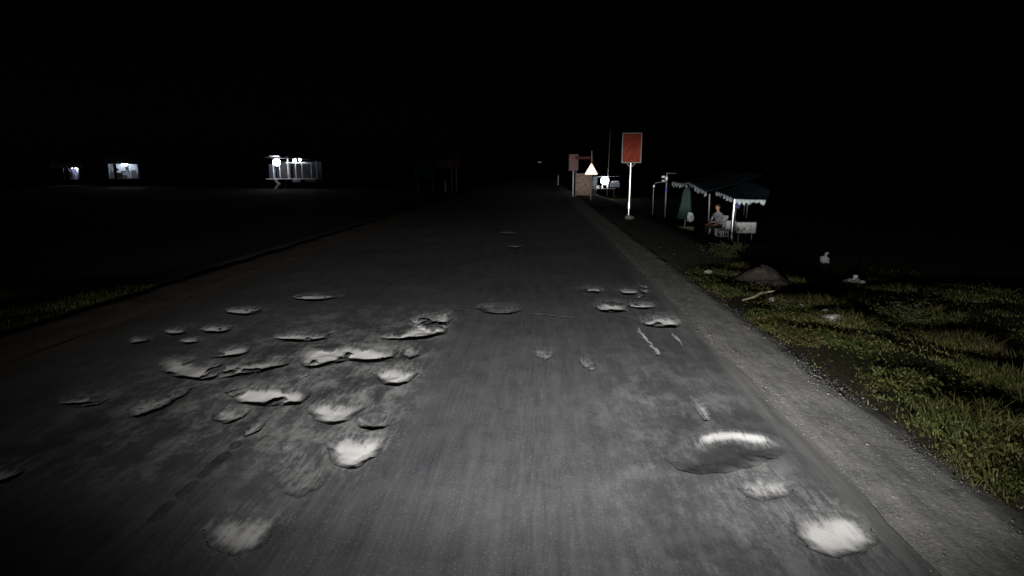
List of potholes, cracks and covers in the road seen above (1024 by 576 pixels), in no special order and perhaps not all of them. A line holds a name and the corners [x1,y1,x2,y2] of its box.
pothole [298,342,400,369]
crack [615,314,683,357]
pothole [223,384,312,407]
pothole [788,507,879,559]
pothole [157,355,294,381]
pothole [327,430,390,469]
pothole [626,302,656,310]
pothole [379,312,454,341]
pothole [211,405,253,425]
pothole [664,429,789,475]
pothole [593,300,628,313]
pothole [306,400,369,425]
